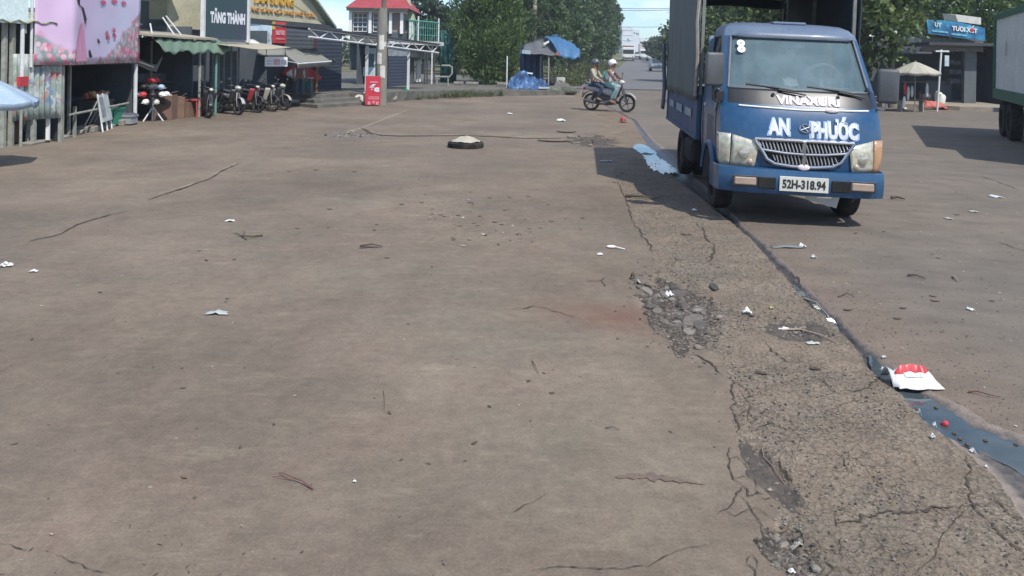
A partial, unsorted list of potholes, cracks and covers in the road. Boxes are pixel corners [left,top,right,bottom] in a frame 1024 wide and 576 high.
crack [690,353,801,536]
crack [151,162,240,199]
crack [765,340,881,396]
crack [28,211,125,242]
pothole [738,435,808,513]
pothole [635,275,720,363]
crack [826,456,1024,576]
crack [531,544,708,570]
crack [616,179,654,252]
